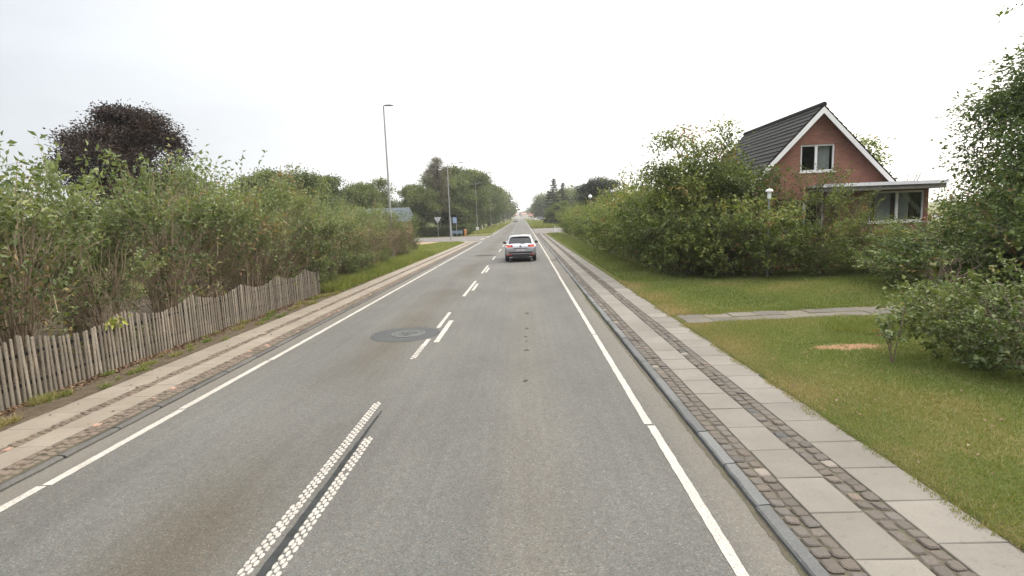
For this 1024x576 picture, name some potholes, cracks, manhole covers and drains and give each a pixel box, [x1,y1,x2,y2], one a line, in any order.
manhole cover [391,330,425,338]
